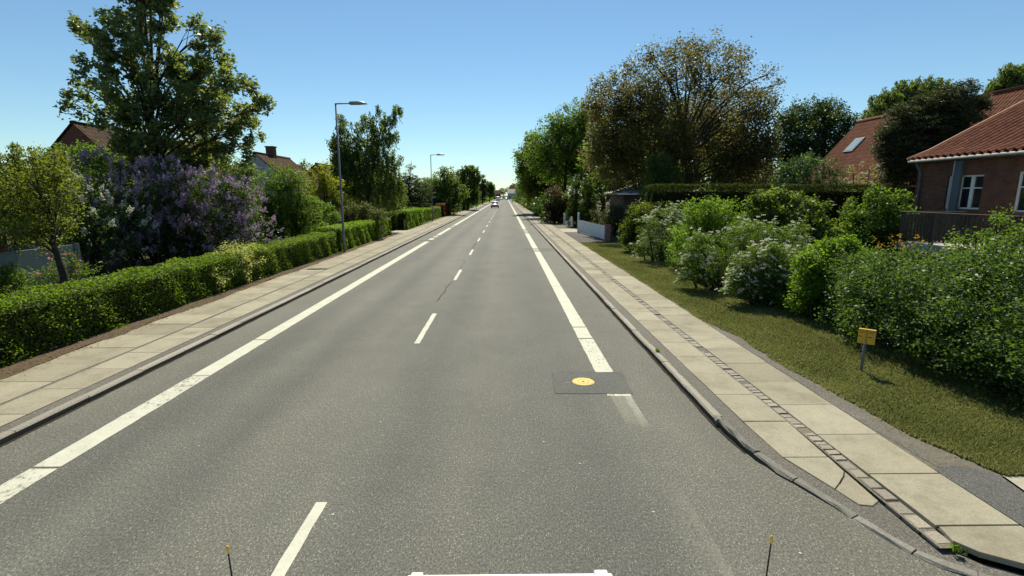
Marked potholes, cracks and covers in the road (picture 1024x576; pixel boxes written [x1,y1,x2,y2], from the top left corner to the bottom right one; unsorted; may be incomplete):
manhole cover [565,378,595,386]
